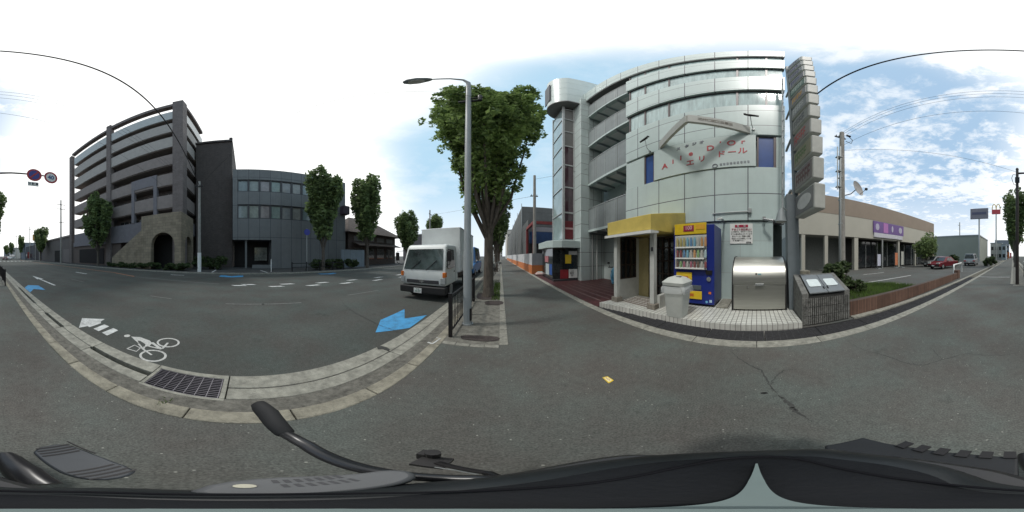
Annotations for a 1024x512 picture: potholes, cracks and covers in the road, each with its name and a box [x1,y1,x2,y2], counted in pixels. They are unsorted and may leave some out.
crack [730,351,812,422]
drain grate [139,365,229,401]
